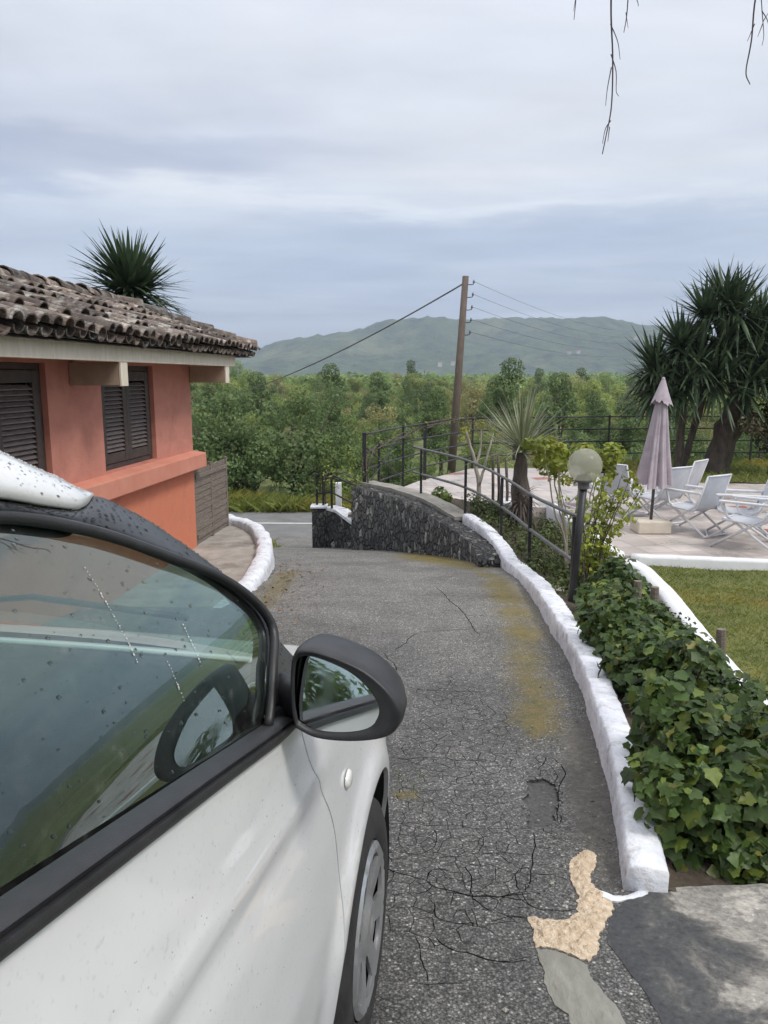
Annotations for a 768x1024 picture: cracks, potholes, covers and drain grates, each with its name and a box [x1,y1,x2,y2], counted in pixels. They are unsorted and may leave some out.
crack [384,588,574,985]
pothole [522,778,561,831]
